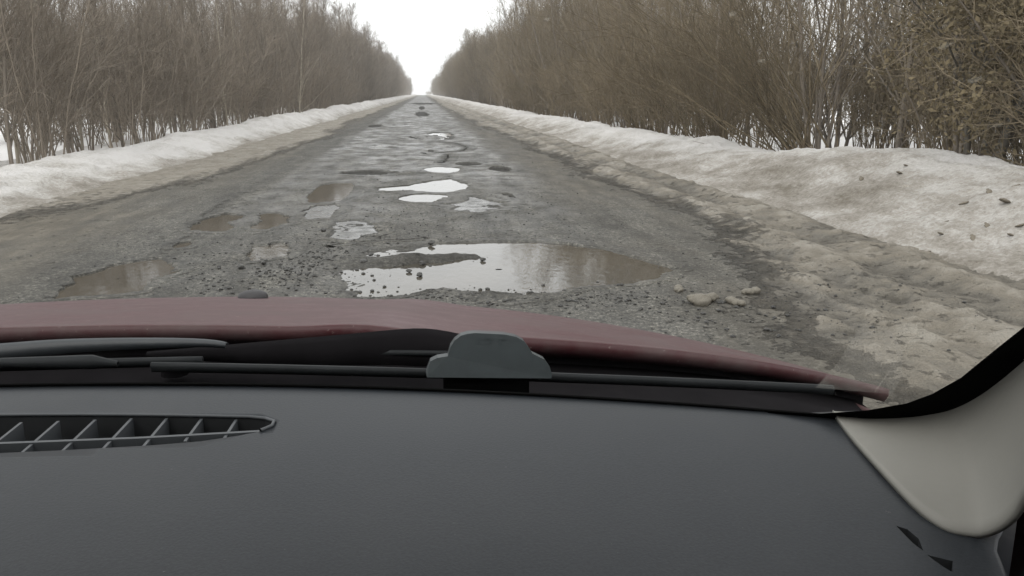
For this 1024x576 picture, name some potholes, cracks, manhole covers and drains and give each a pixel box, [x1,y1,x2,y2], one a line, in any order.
pothole [40,255,198,302]
pothole [412,130,470,141]
pothole [308,216,396,244]
pothole [313,238,695,306]
pothole [361,177,484,195]
pothole [425,193,527,215]
pothole [383,192,469,204]
pothole [295,180,366,206]
pothole [408,165,474,174]
pothole [473,165,526,173]
pothole [286,201,352,222]
pothole [174,211,262,234]
